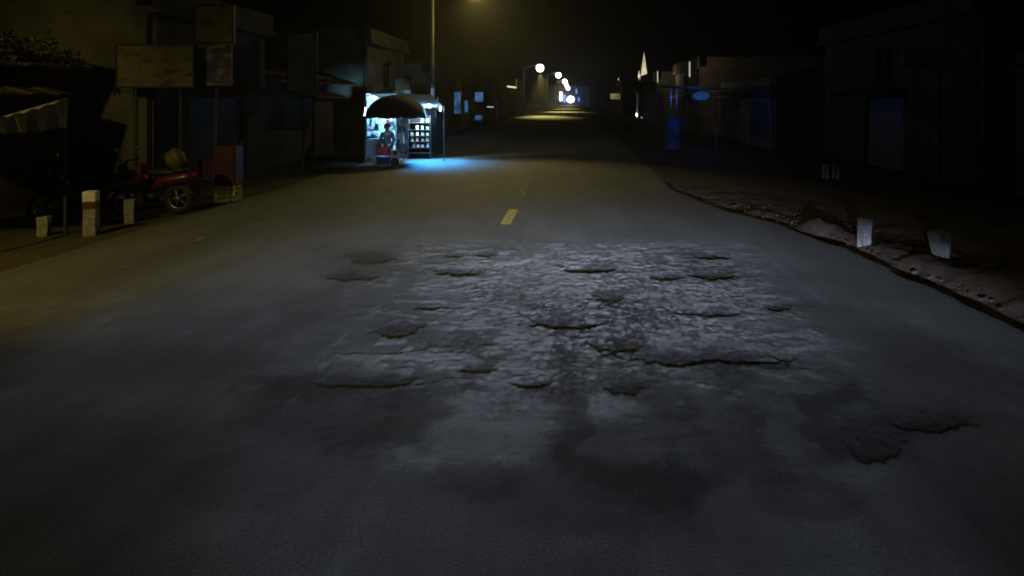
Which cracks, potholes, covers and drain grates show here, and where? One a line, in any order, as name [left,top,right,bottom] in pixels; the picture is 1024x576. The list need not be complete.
pothole [313,371,430,389]
pothole [423,266,488,277]
pothole [591,289,626,306]
pothole [368,318,429,339]
pothole [606,348,810,367]
pothole [509,314,617,331]
pothole [556,262,618,274]
pothole [508,375,561,389]
pothole [839,425,911,464]
pothole [602,377,651,396]
pothole [342,249,402,266]
pothole [673,308,749,318]
